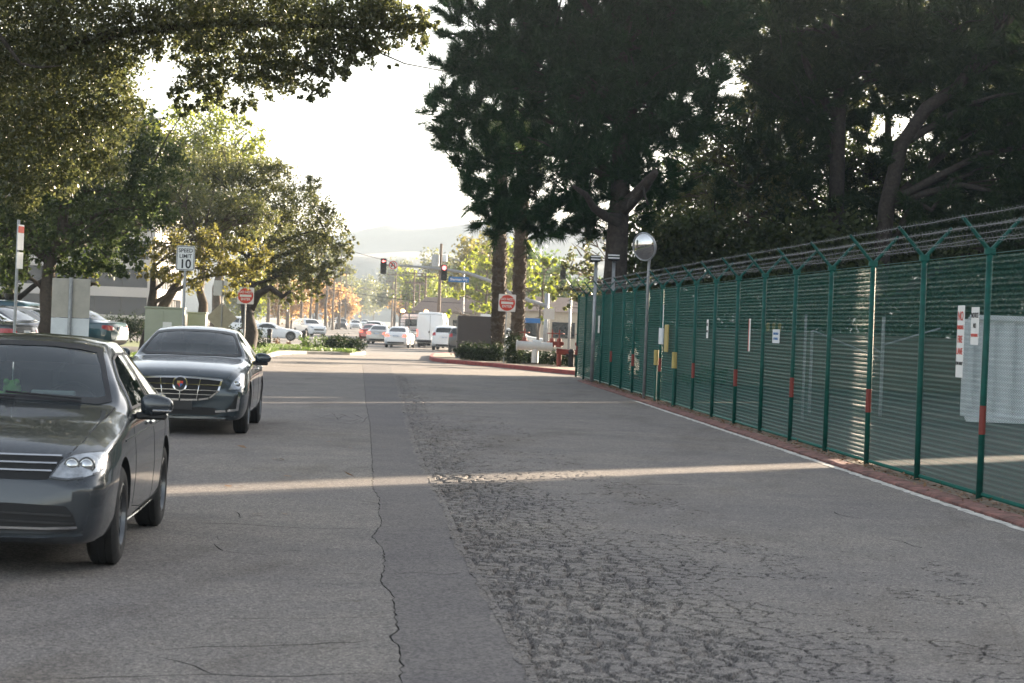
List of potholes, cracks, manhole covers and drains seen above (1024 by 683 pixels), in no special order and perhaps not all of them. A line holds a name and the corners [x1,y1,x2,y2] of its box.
crack [179,367,1024,683]
crack [28,640,371,680]
